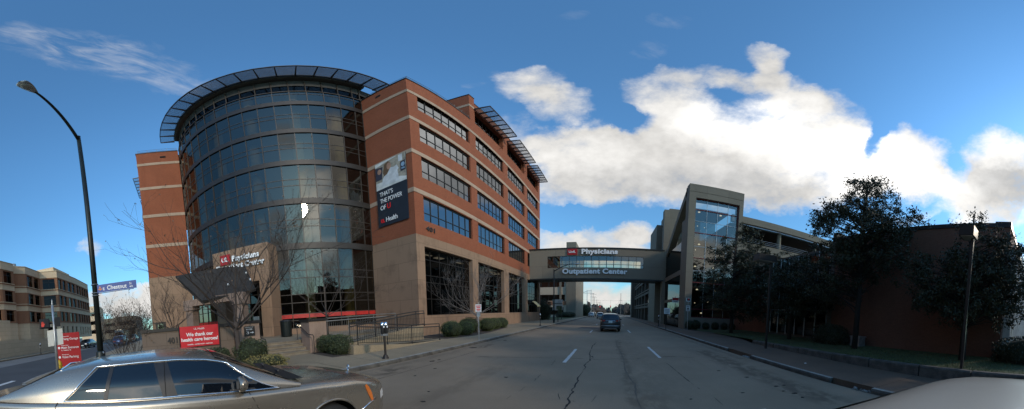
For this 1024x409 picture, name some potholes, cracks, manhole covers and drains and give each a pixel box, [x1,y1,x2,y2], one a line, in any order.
crack [508,343,604,409]
